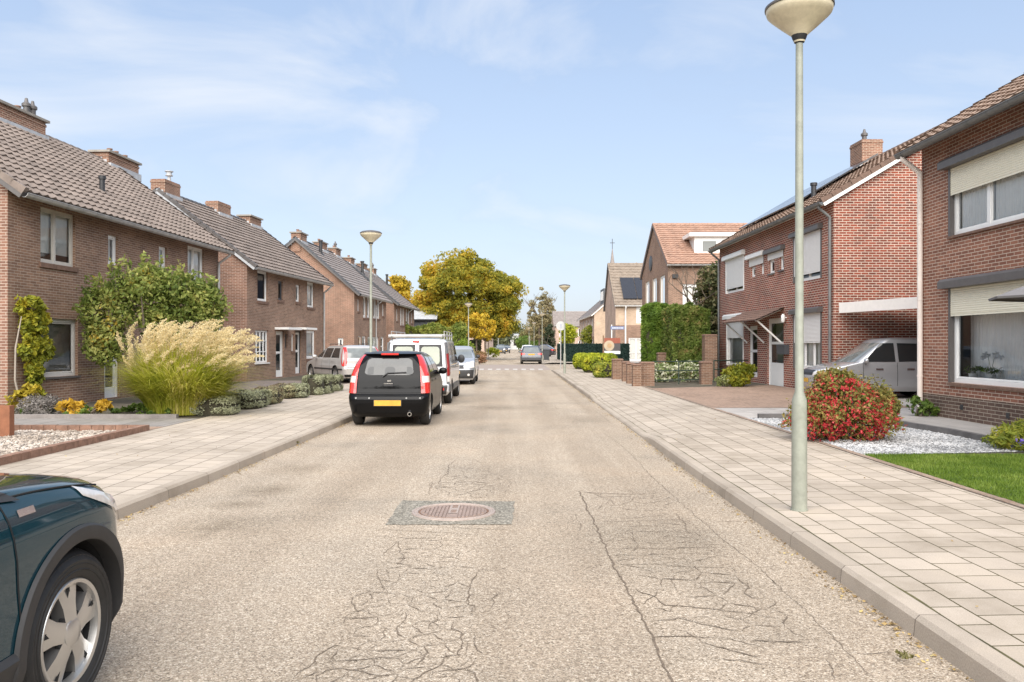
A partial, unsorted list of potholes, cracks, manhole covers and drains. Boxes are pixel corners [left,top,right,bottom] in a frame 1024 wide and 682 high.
crack [575,490,835,682]
manhole cover [385,500,515,525]
